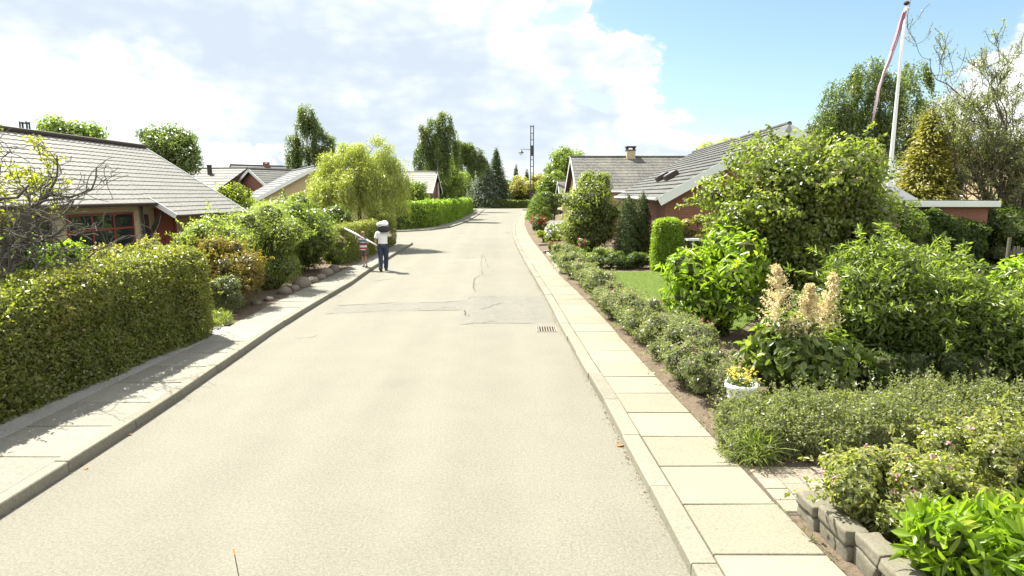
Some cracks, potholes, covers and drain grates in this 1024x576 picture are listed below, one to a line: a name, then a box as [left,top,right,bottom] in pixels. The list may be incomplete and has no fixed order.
crack [331,255,497,325]
